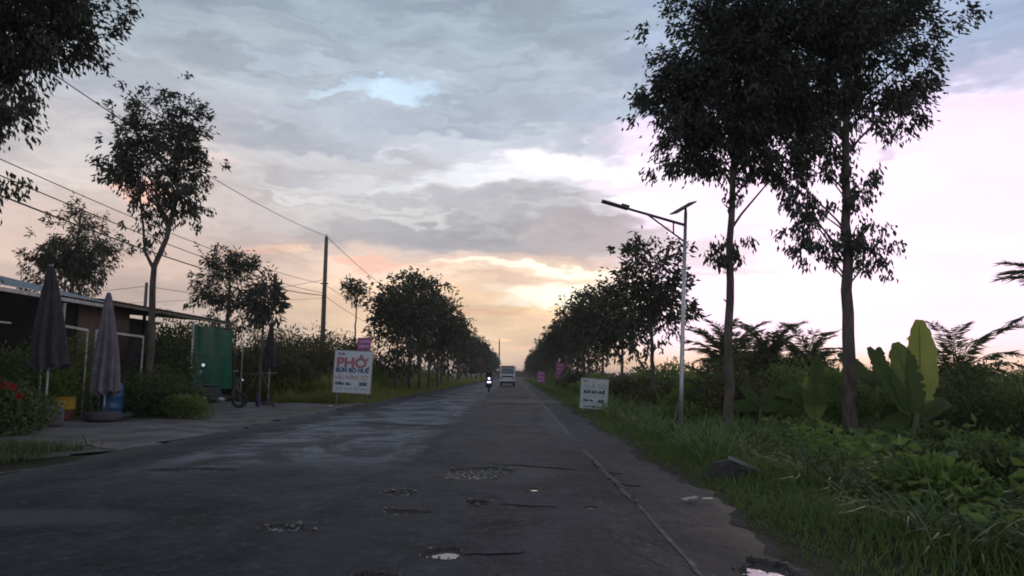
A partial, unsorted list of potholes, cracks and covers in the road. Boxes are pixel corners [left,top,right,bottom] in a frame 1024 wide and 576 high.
pothole [256,521,316,533]
pothole [441,465,519,480]
pothole [462,497,492,505]
pothole [419,546,464,559]
pothole [378,487,417,497]
pothole [383,507,434,515]
pothole [732,554,802,576]
